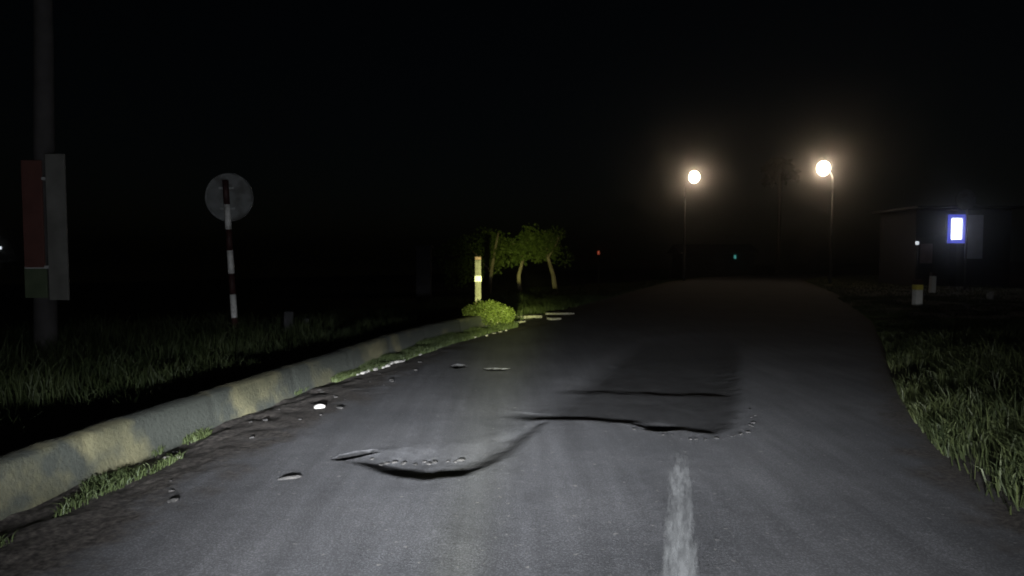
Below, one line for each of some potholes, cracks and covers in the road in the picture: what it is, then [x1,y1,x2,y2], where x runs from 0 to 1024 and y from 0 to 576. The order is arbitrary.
pothole [491,330,751,436]
pothole [344,422,549,481]
pothole [330,449,381,461]
